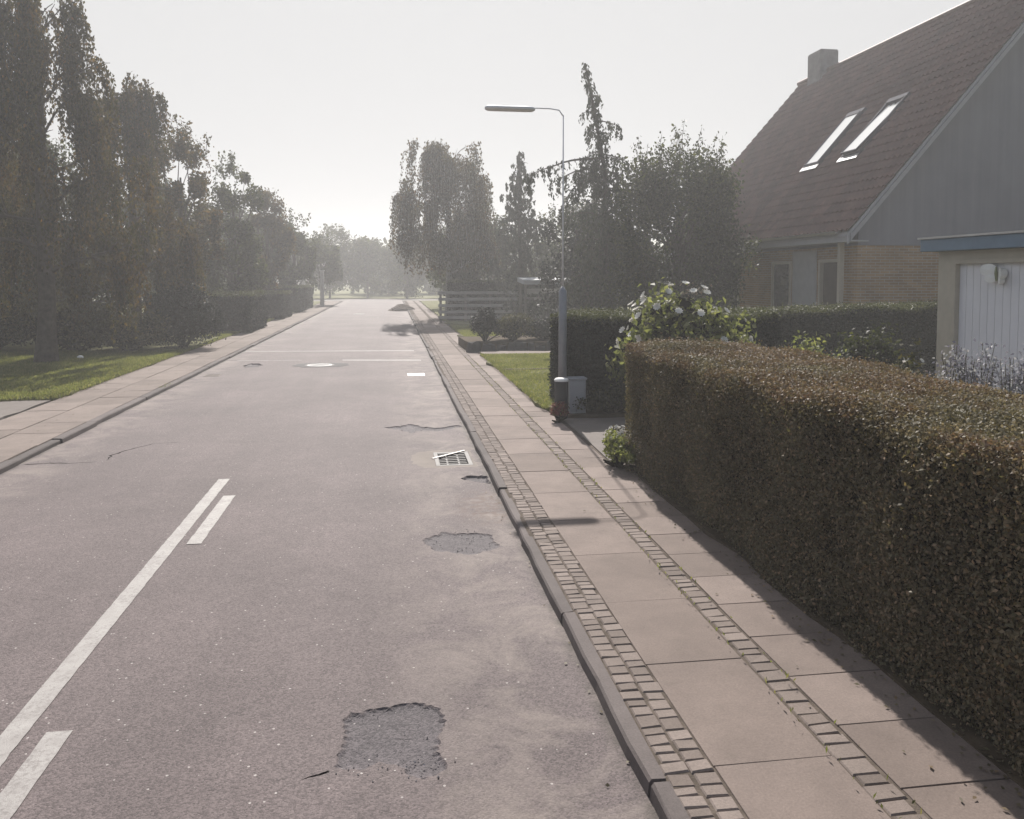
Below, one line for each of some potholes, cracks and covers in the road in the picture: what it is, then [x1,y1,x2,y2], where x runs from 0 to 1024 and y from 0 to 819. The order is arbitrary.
pothole [461,475,492,484]
drain grate [411,450,479,468]
pothole [422,532,503,555]
pothole [302,702,456,782]
